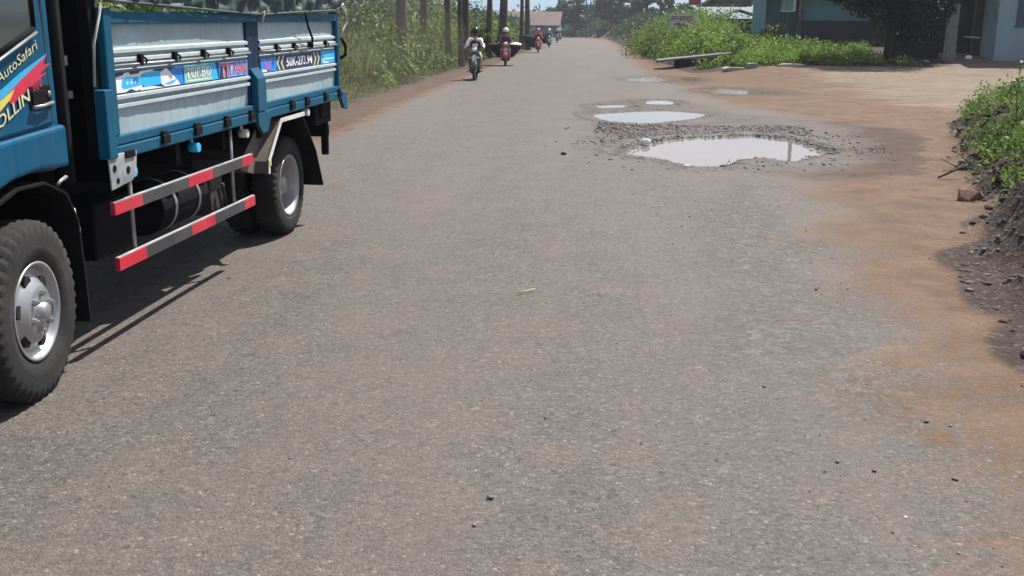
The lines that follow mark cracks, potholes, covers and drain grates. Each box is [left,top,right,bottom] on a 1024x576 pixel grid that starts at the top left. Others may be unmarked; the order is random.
pothole [572,108,724,125]
pothole [593,132,857,169]
